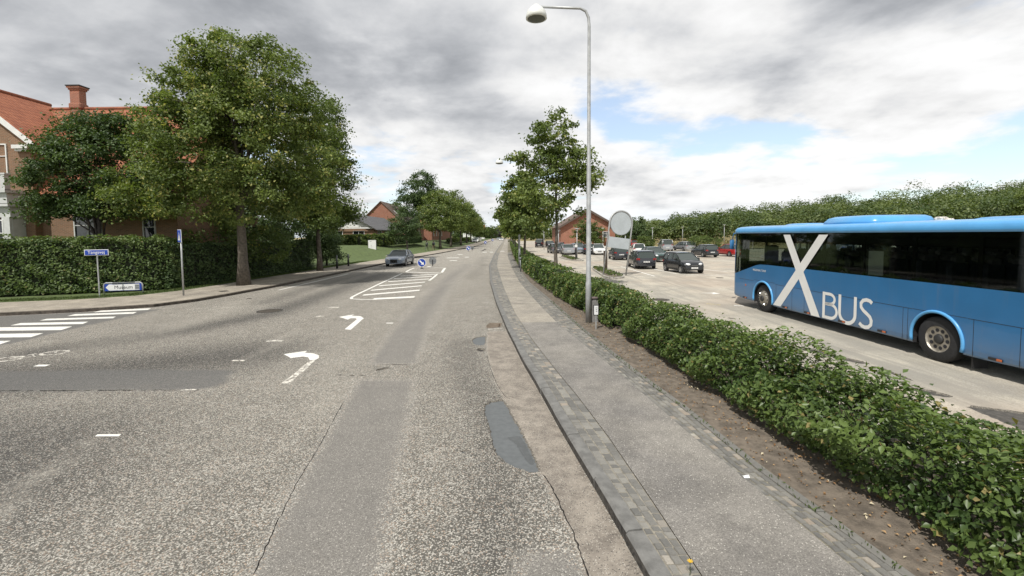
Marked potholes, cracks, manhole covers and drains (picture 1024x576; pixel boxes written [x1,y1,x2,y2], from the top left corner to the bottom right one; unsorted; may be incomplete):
crack [253,403,343,575]
crack [543,475,589,576]
